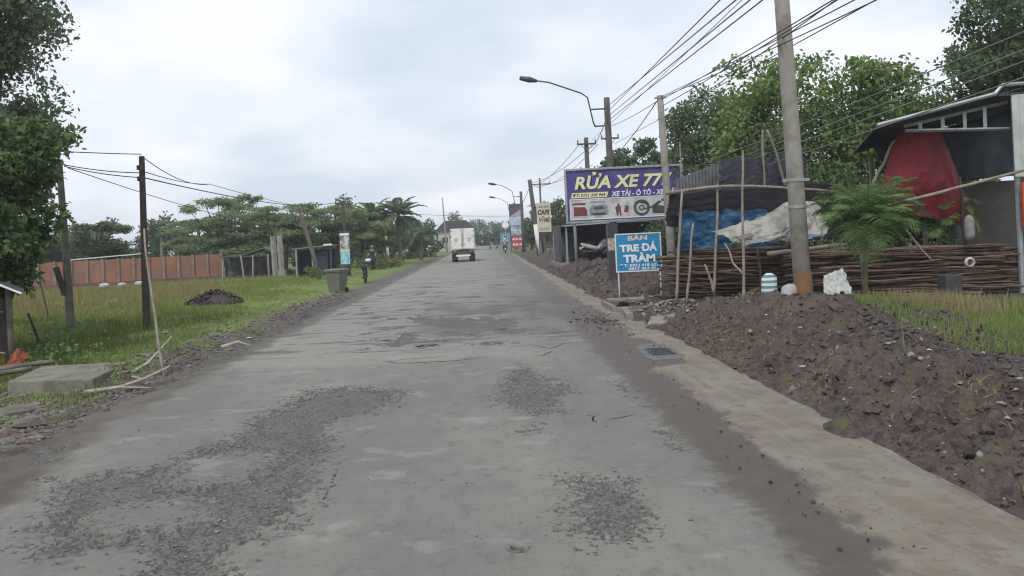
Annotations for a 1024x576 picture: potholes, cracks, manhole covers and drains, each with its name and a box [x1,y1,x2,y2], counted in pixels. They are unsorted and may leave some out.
crack [354,344,596,437]
pothole [397,314,524,330]
pothole [427,330,497,338]
pothole [489,327,532,336]
